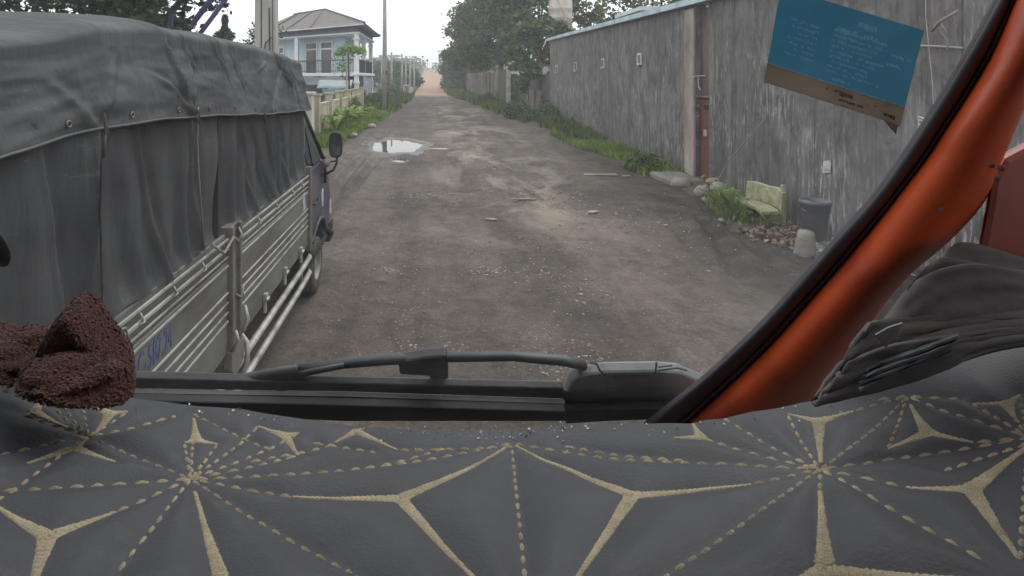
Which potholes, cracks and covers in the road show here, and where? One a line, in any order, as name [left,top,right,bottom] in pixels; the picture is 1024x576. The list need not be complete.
pothole [361,137,434,156]
